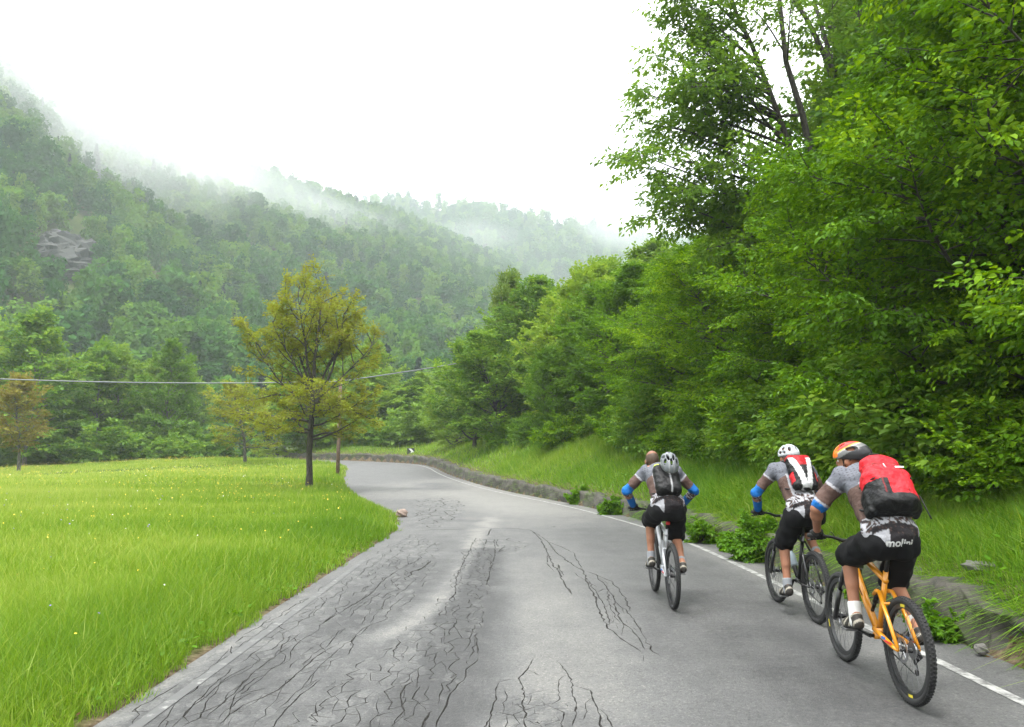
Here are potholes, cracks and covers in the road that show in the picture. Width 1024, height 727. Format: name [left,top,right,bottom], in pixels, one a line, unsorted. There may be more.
crack [132,526,661,727]
crack [416,499,465,531]
